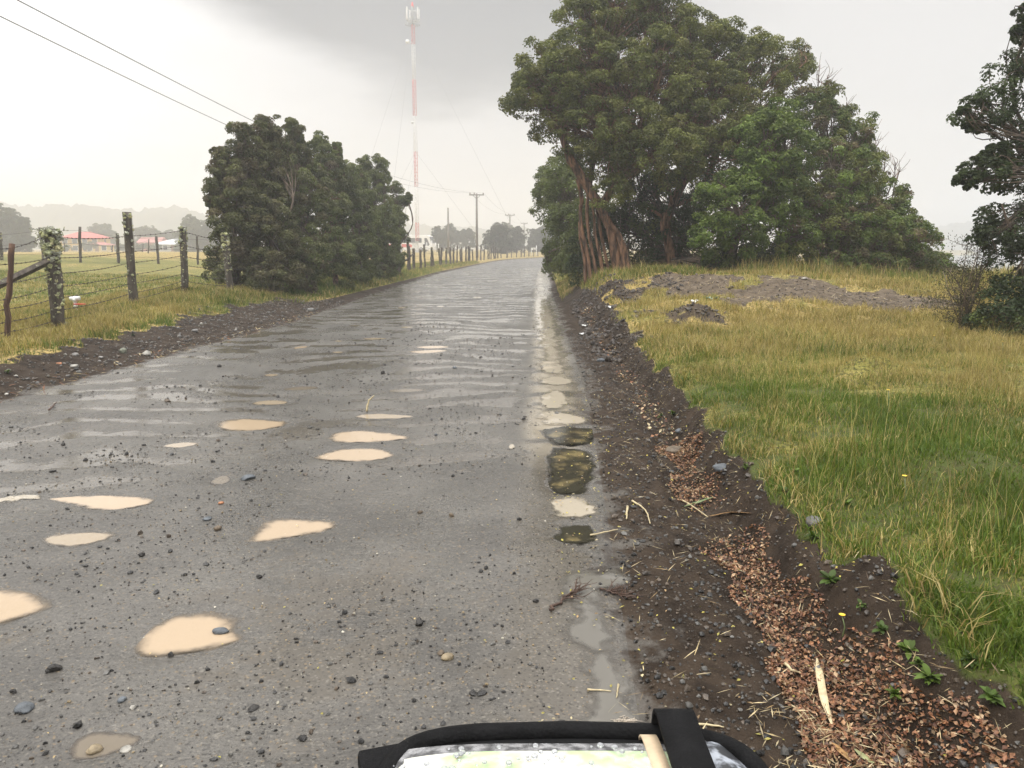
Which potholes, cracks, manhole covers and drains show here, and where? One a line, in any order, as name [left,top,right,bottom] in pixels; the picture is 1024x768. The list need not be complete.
pothole [247,517,338,543]
pothole [0,586,53,625]
pothole [68,731,141,762]
pothole [313,448,395,462]
pothole [48,495,155,511]
pothole [41,531,118,548]
pothole [327,430,410,444]
pothole [215,418,289,432]
pothole [131,611,245,659]
